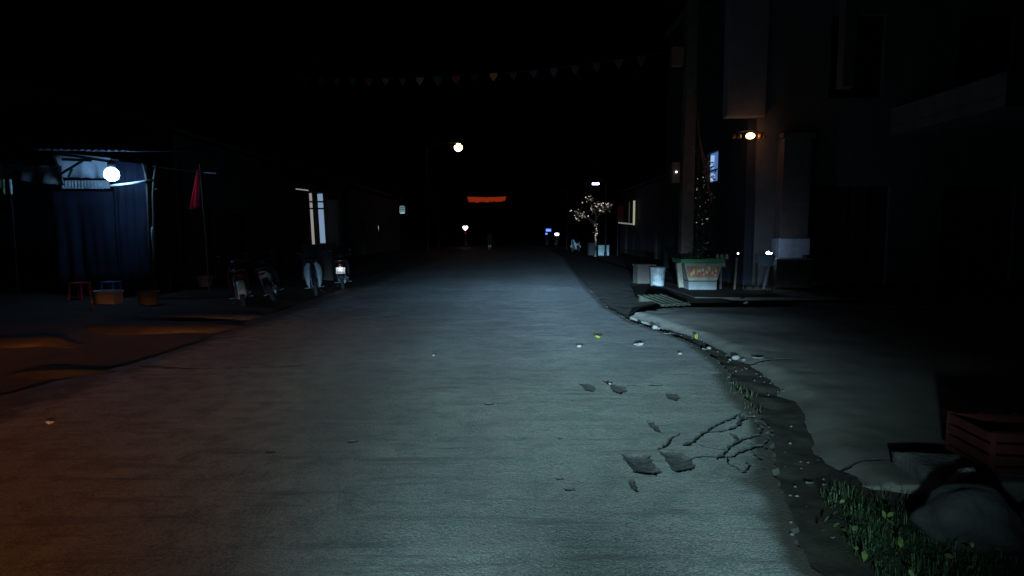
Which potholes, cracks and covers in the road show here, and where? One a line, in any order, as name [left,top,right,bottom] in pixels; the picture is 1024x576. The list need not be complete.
pothole [577,382,596,392]
crack [841,459,891,470]
pothole [603,378,628,394]
crack [657,411,775,473]
pothole [619,453,662,476]
pothole [659,450,696,473]
